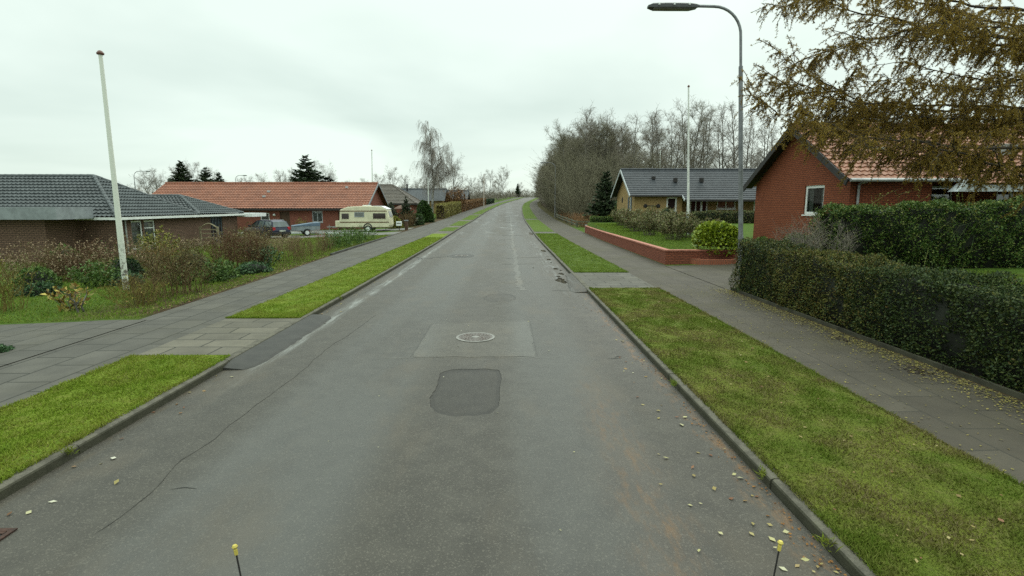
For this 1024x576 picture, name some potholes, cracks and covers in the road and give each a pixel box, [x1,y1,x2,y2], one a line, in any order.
drain grate [0,528,18,541]
manhole cover [456,332,495,342]
crack [98,316,374,532]
